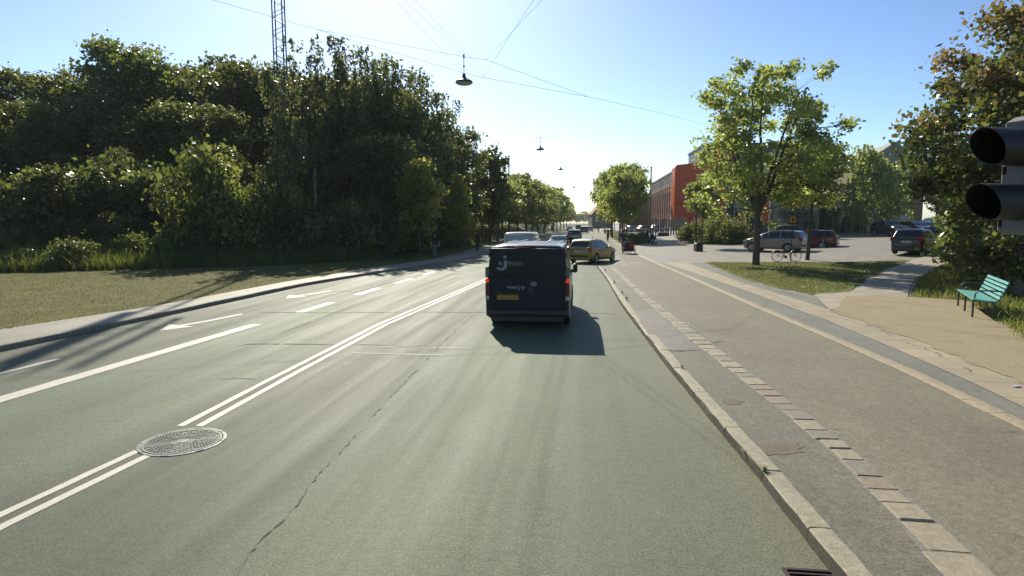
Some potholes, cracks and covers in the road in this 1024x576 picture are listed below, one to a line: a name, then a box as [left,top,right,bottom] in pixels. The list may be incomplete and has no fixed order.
drain grate [781,567,835,576]
manhole cover [136,428,227,457]
crack [238,320,467,573]
